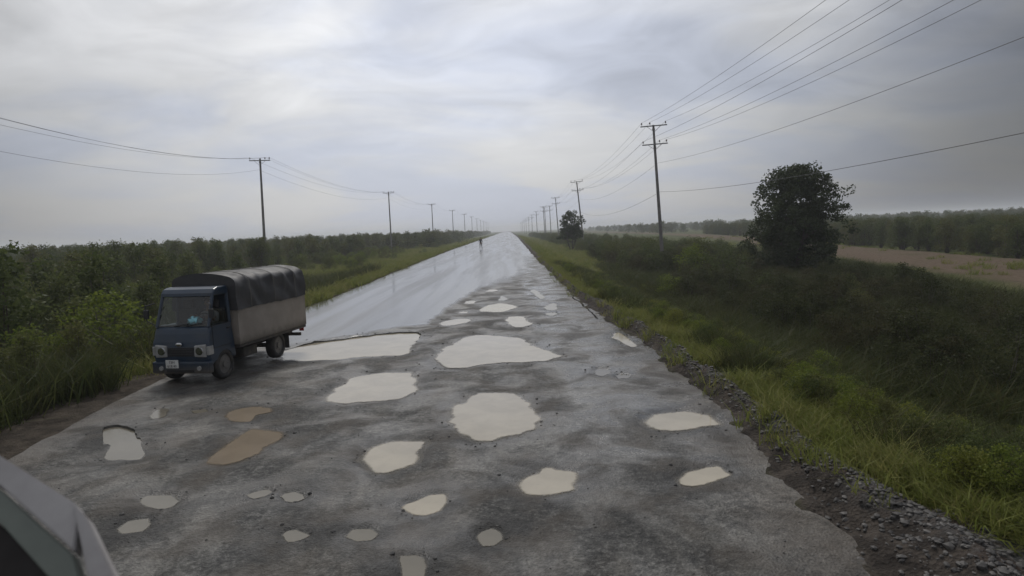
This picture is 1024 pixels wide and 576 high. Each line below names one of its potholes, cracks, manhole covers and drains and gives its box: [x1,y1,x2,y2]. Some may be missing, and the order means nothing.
pothole [363,441,424,473]
pothole [346,529,378,542]
pothole [325,372,418,404]
pothole [644,411,719,431]
pothole [679,466,730,487]
pothole [611,333,637,347]
pothole [282,530,310,543]
pothole [102,425,145,461]
pothole [519,468,577,496]
pothole [206,429,283,465]
pothole [449,393,542,442]
pothole [477,529,503,547]
